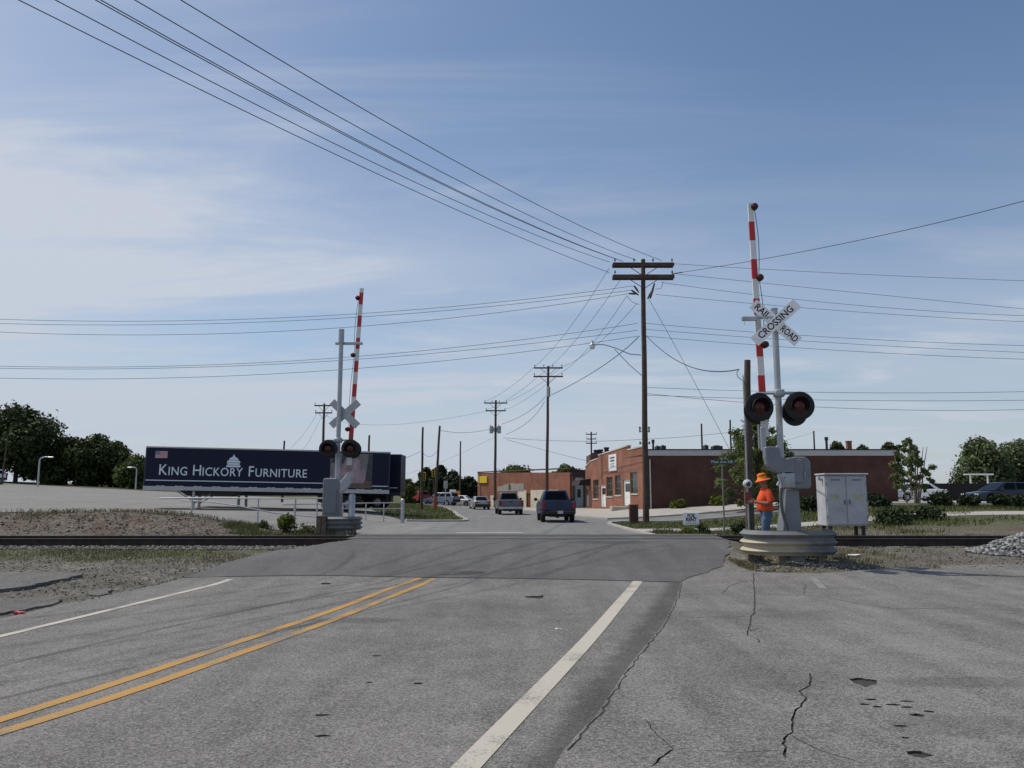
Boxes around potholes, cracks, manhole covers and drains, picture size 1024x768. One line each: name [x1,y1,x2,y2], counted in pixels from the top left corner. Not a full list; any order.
crack [693,573,1020,643]
crack [721,673,861,763]
pothole [849,678,877,687]
